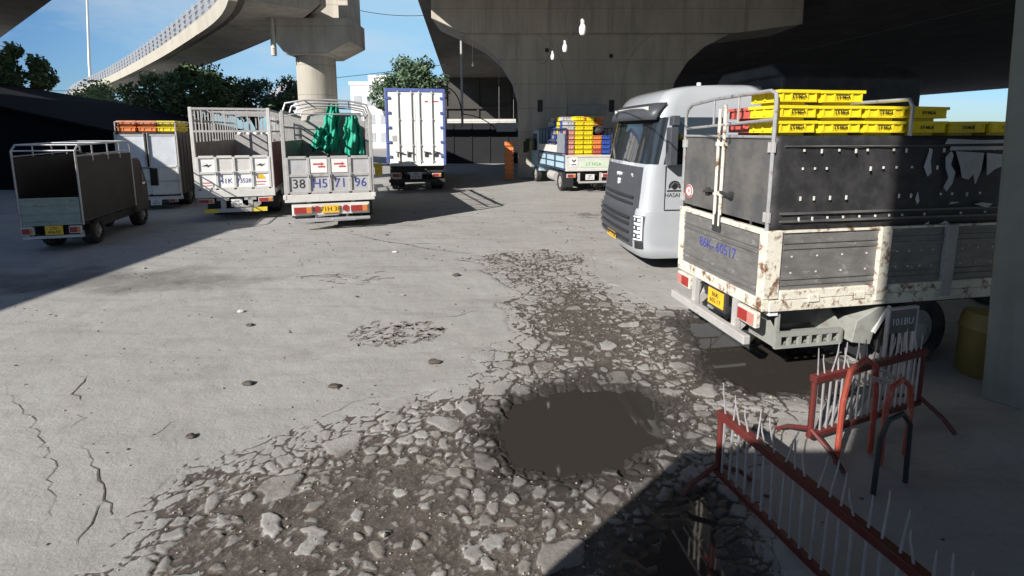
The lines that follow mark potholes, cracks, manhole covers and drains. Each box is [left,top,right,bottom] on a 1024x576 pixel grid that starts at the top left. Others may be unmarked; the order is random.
pothole [479,380,685,490]
crack [70,232,883,576]
